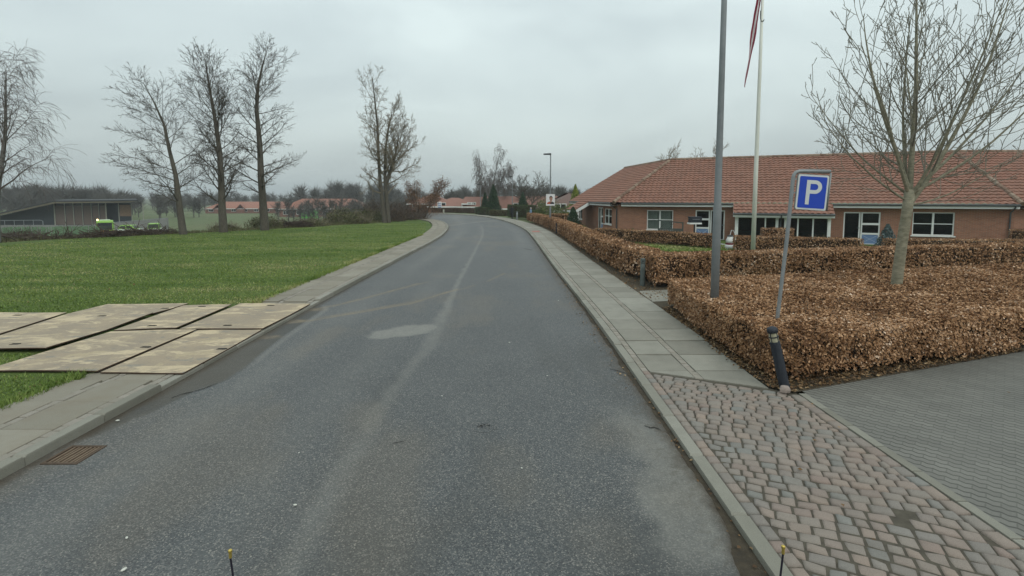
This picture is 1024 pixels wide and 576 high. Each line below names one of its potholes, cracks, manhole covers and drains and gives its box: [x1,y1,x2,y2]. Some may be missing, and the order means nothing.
drain grate [40,445,107,465]
